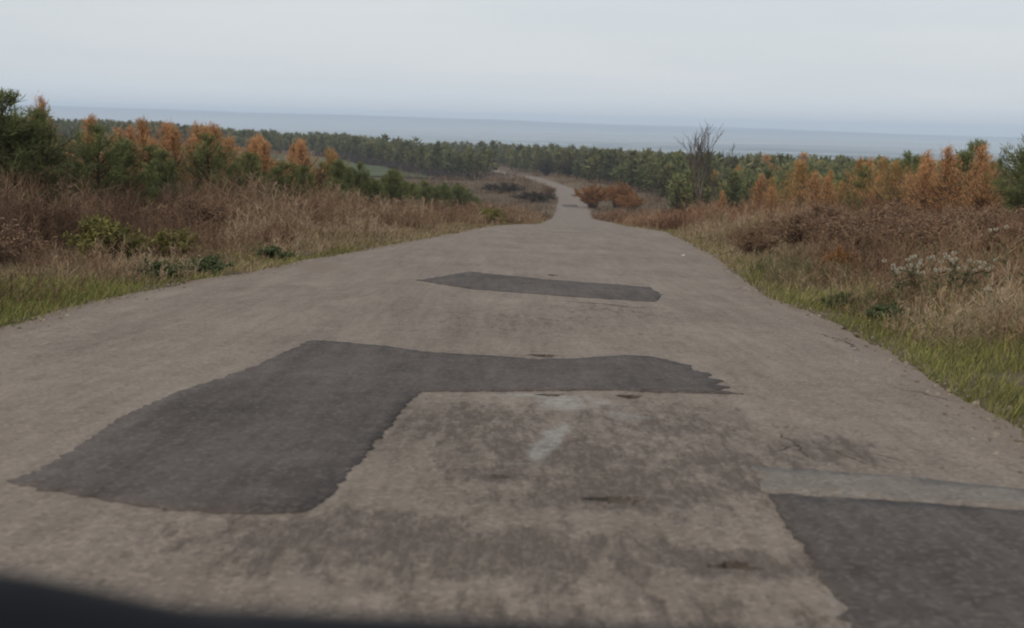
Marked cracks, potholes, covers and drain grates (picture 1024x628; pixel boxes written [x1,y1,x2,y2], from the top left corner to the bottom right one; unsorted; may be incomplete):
pothole [706,560,766,571]
pothole [581,496,646,505]
crack [766,419,908,470]
